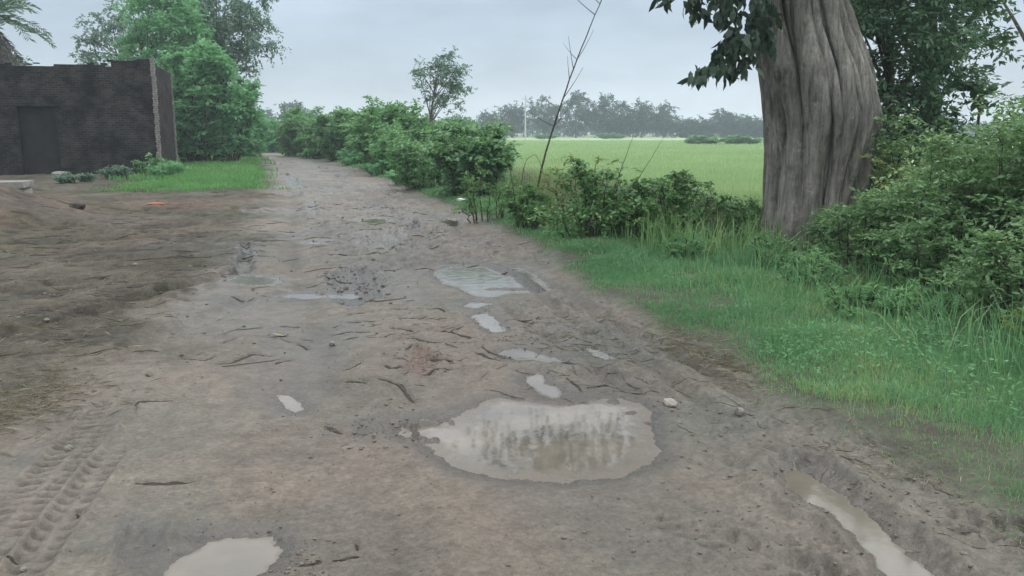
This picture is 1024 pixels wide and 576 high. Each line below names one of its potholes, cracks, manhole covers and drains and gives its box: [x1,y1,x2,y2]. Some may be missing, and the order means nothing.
pothole [145,529,293,576]
pothole [430,263,556,297]
pothole [467,310,511,333]
pothole [388,385,671,487]
pothole [318,262,391,309]
pothole [270,291,363,299]
pothole [218,272,286,286]
crack [539,354,611,391]
pothole [516,367,567,399]
pothole [776,454,950,576]
pothole [268,390,312,414]
